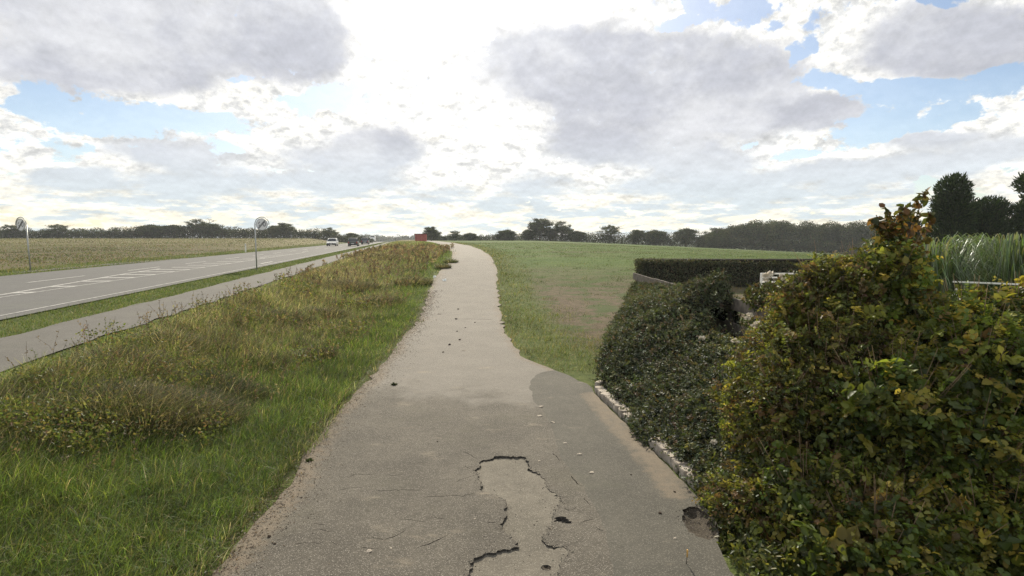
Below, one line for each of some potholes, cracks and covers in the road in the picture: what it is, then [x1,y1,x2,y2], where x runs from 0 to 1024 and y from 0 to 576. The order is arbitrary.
pothole [468,456,570,576]
pothole [682,507,717,540]
crack [363,517,447,549]
